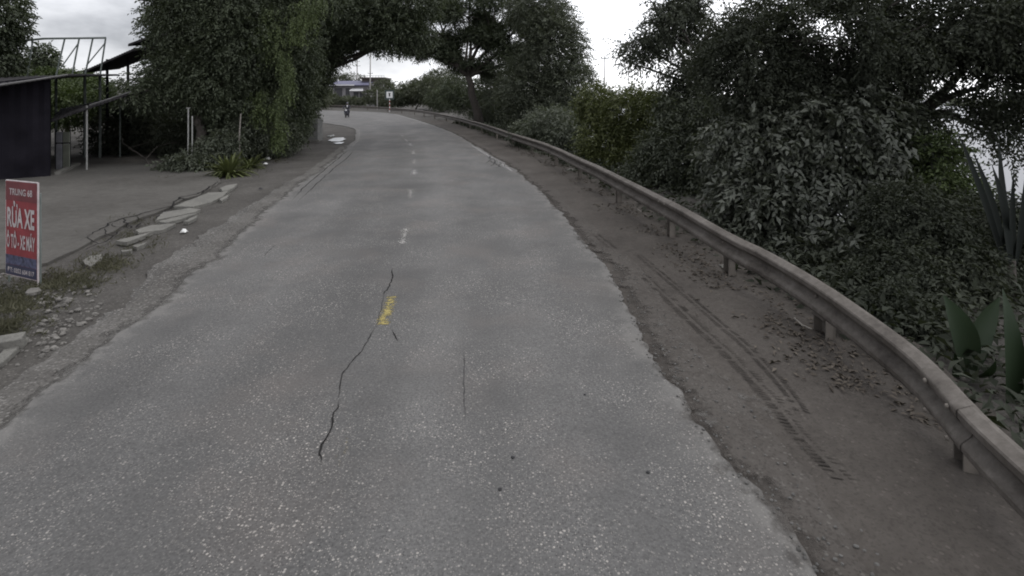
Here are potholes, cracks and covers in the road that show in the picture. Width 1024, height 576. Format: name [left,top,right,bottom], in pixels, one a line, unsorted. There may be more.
crack [85,182,217,250]
crack [318,270,398,463]
